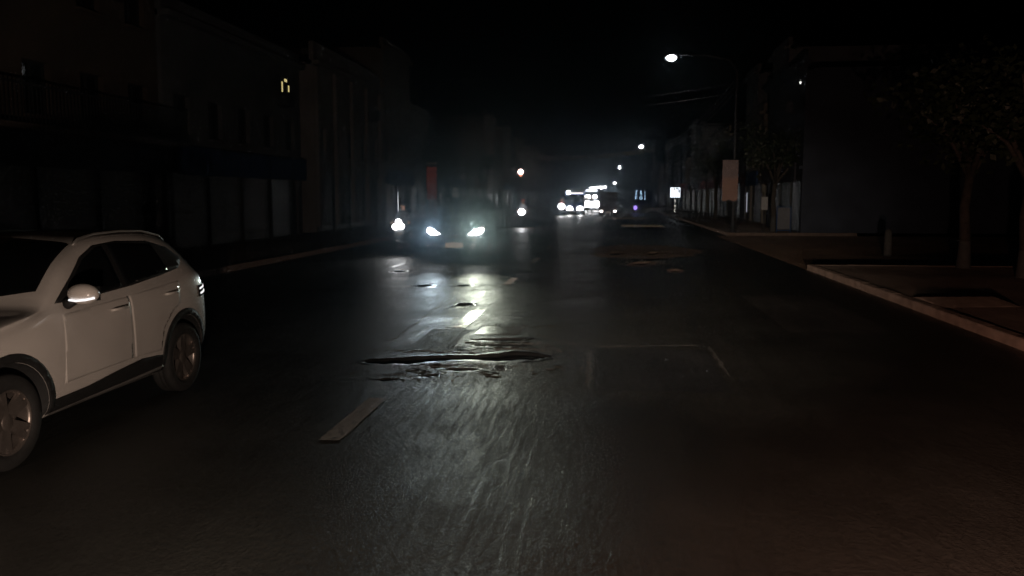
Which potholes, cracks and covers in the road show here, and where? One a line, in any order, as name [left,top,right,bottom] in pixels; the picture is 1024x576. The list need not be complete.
pothole [355,350,556,367]
